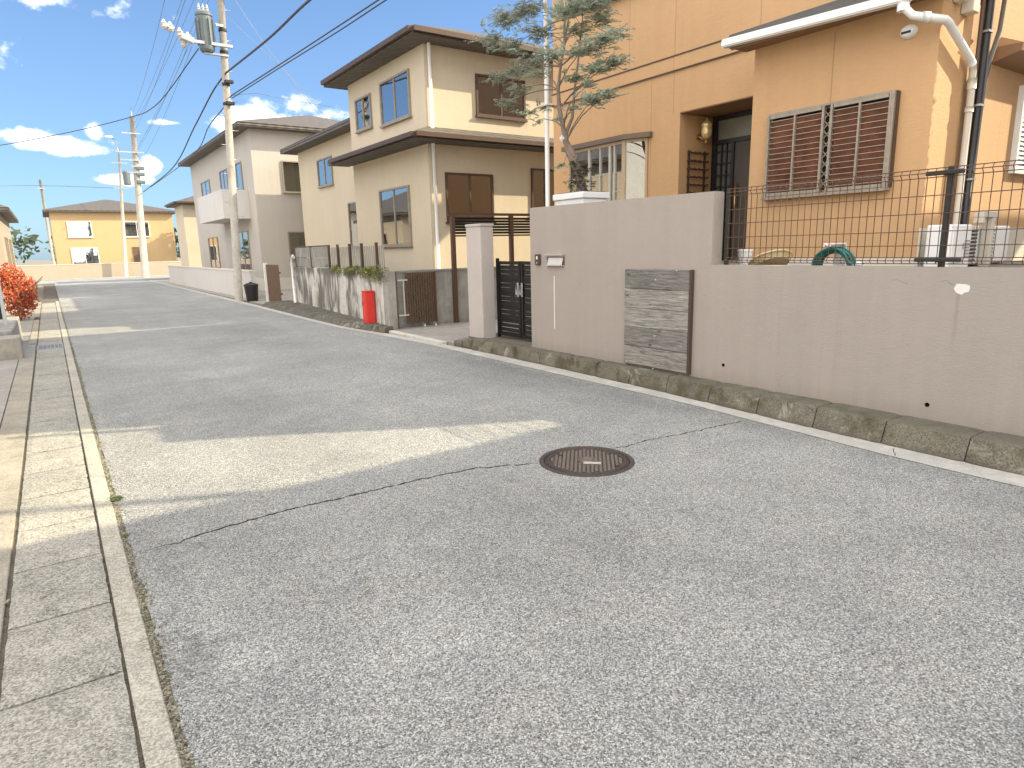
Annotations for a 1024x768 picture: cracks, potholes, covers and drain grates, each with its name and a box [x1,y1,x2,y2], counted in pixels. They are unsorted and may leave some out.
manhole cover [539,446,635,477]
crack [616,421,741,448]
crack [149,463,532,551]
